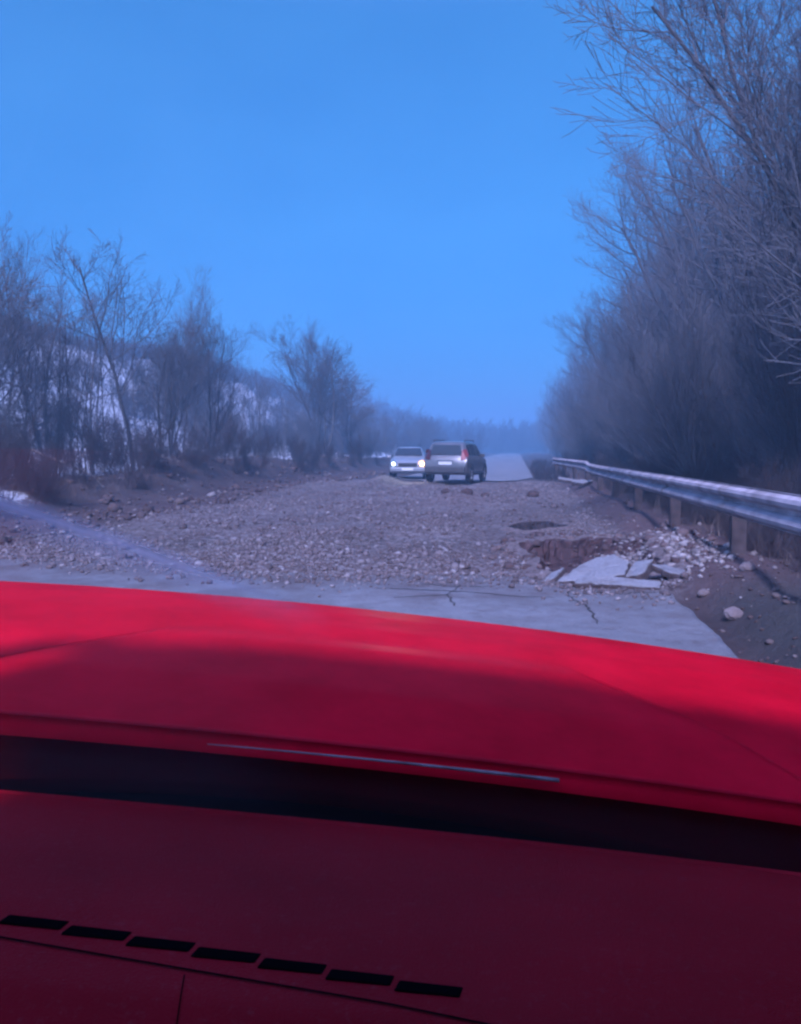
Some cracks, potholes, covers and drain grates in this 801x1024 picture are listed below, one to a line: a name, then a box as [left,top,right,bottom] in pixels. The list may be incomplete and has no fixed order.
crack [567,591,657,624]
pothole [499,521,575,534]
crack [390,583,555,606]
pothole [502,532,689,581]
